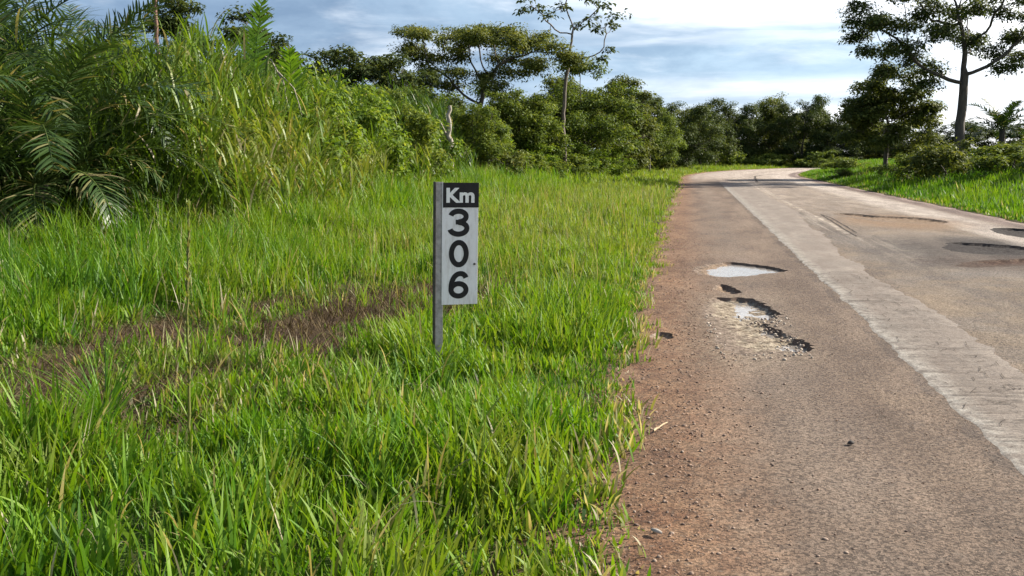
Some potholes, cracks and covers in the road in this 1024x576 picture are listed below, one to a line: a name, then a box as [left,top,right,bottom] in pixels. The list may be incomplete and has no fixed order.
pothole [833,213,947,224]
pothole [712,284,743,294]
crack [820,214,857,236]
pothole [701,297,815,356]
pothole [650,332,674,340]
pothole [990,228,1024,238]
pothole [941,242,1024,255]
pothole [692,262,788,277]
